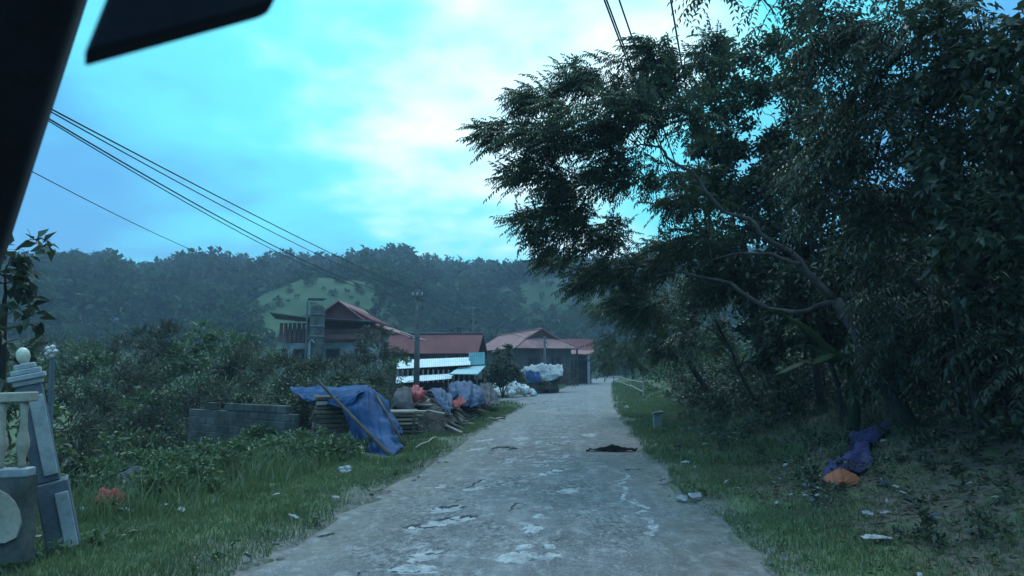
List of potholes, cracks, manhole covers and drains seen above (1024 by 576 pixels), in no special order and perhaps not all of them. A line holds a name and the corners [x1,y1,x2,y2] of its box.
pothole [494,551,534,565]
pothole [400,524,430,533]
pothole [419,514,479,528]
crack [448,470,527,503]
